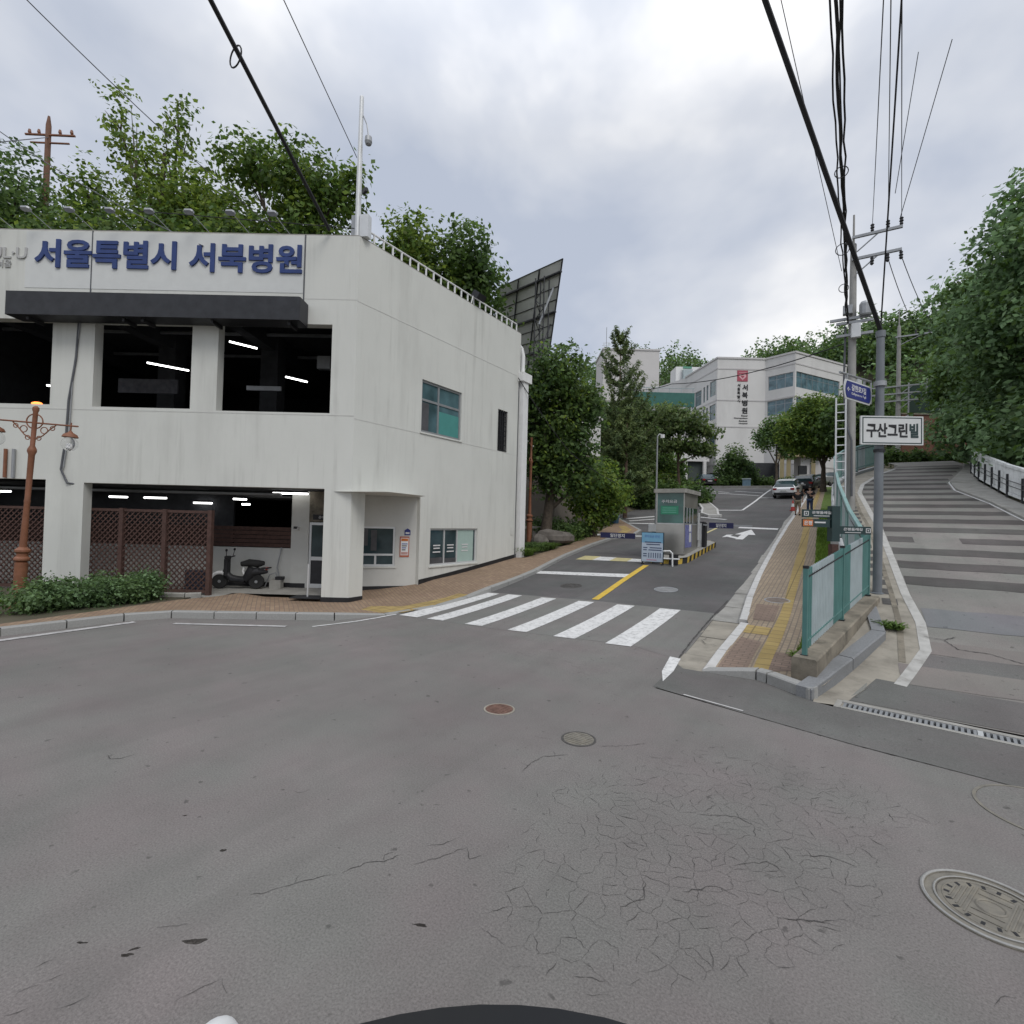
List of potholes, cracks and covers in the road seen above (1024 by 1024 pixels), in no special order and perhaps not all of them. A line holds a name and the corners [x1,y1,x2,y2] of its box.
crack [694,747,940,828]
crack [254,852,401,894]
drain grate [833,699,1024,748]
crack [482,755,894,996]
manhole cover [972,784,1024,830]
manhole cover [561,731,596,747]
manhole cover [484,703,515,715]
manhole cover [919,869,1024,953]
